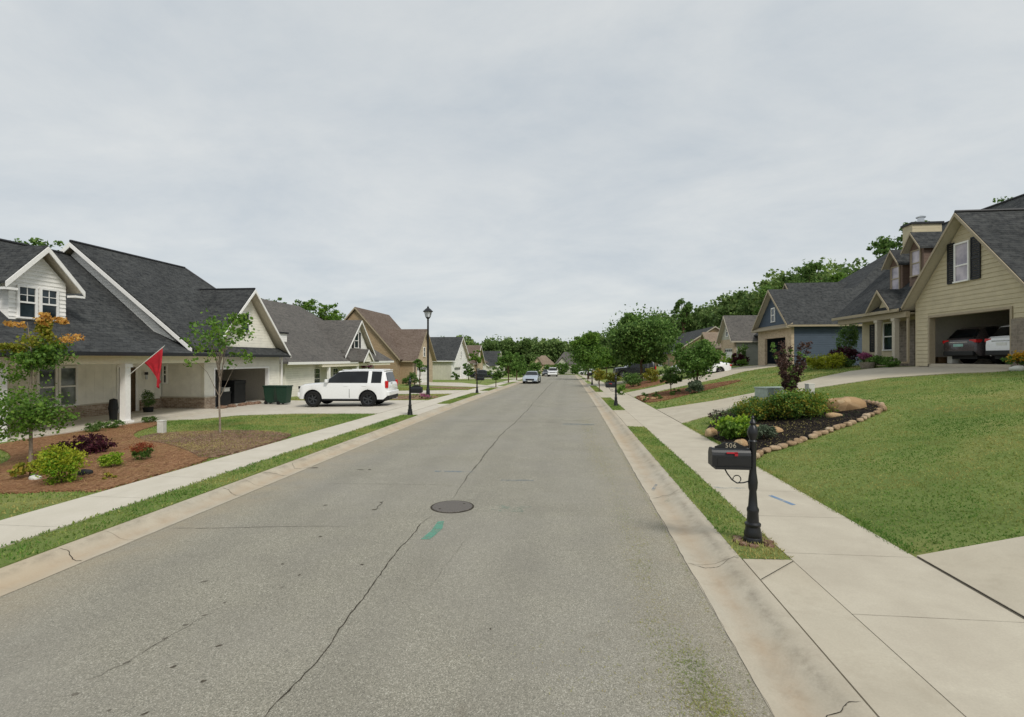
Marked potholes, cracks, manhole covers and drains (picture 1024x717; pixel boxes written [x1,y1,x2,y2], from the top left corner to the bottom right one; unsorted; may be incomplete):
manhole cover [430,500,474,513]
crack [265,516,431,716]
